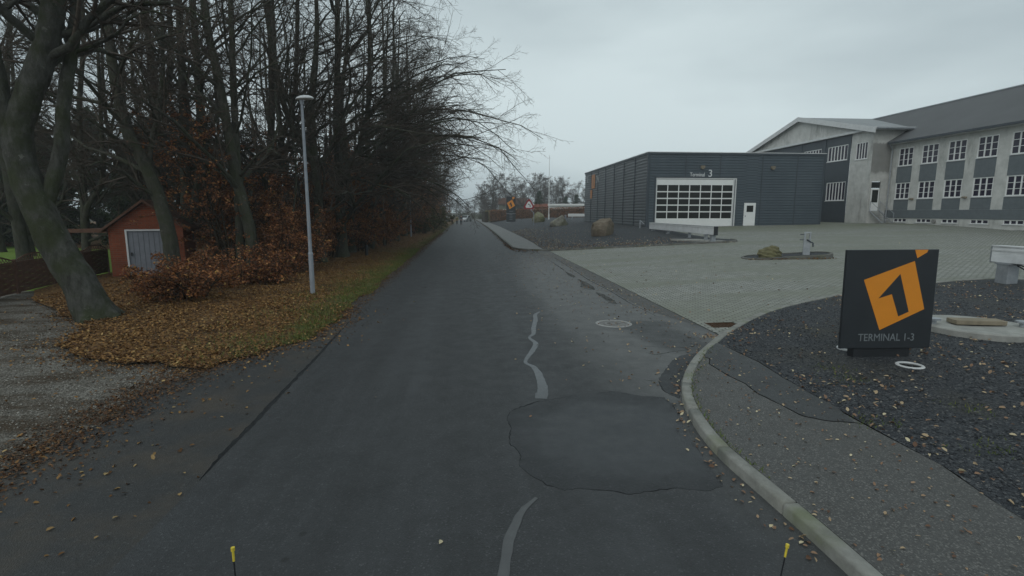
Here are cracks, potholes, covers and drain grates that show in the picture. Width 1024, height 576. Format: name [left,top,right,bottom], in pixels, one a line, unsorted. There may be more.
crack [646,346,861,424]
manhole cover [596,320,632,328]
